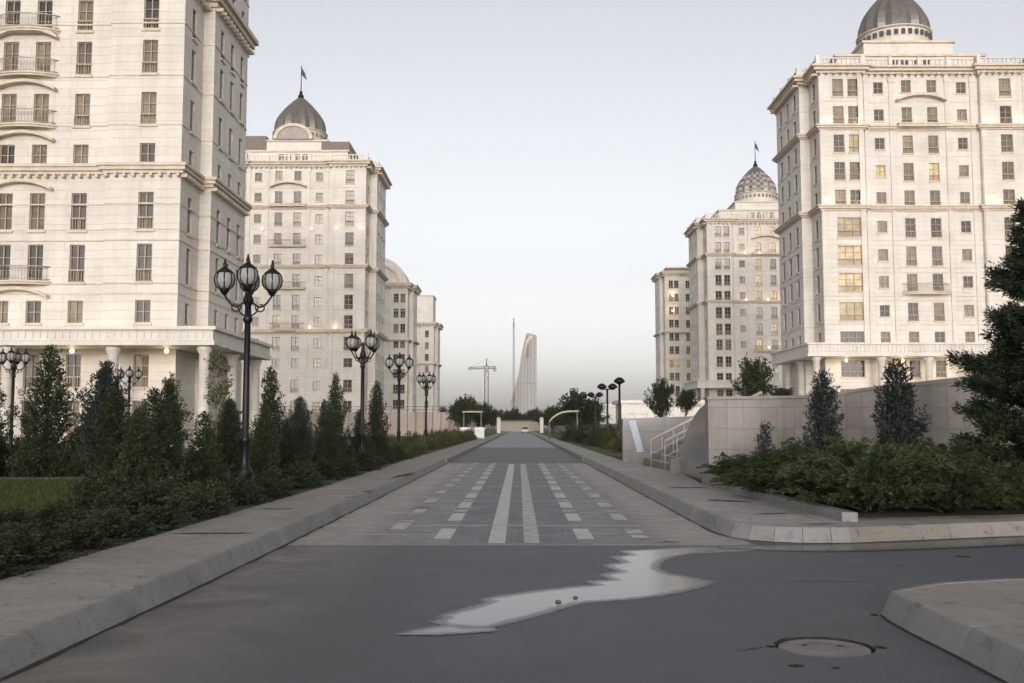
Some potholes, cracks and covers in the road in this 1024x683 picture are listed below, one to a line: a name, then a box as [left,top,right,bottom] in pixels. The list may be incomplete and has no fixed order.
manhole cover [773,637,876,657]
